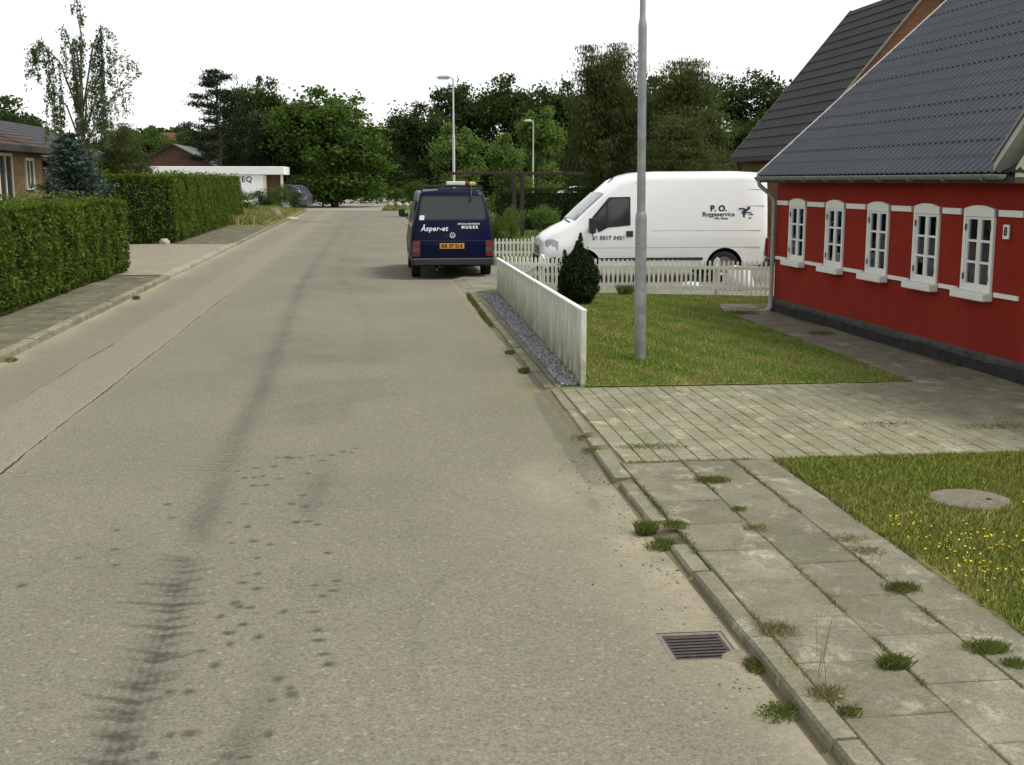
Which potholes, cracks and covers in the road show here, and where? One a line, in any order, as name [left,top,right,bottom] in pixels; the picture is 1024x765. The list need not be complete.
manhole cover [928,489,1013,511]
